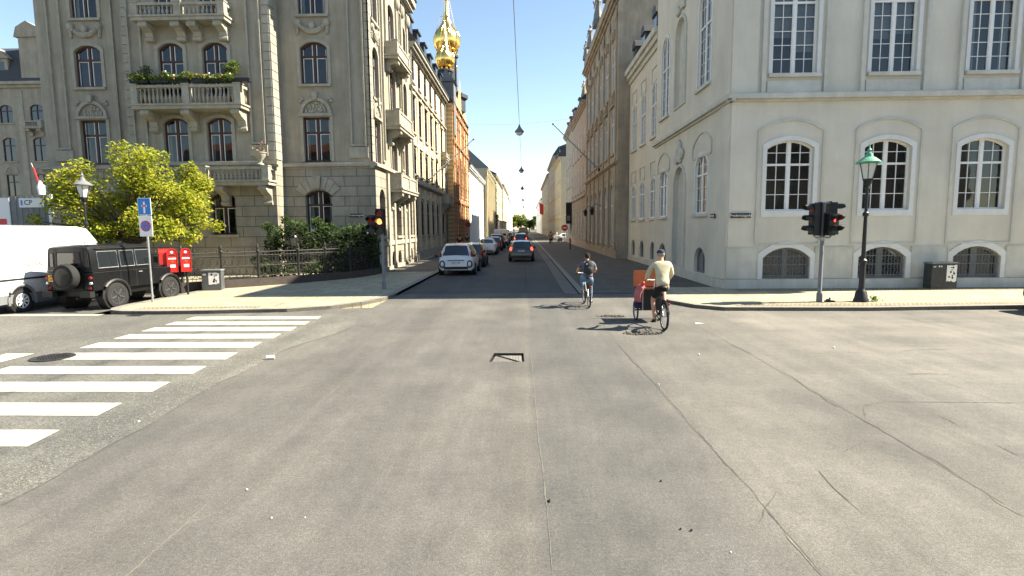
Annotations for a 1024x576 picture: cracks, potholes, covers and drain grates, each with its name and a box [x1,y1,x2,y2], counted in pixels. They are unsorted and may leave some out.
crack [618,345,739,476]
manhole cover [28,353,76,362]
crack [843,402,961,478]
crack [759,491,823,576]
